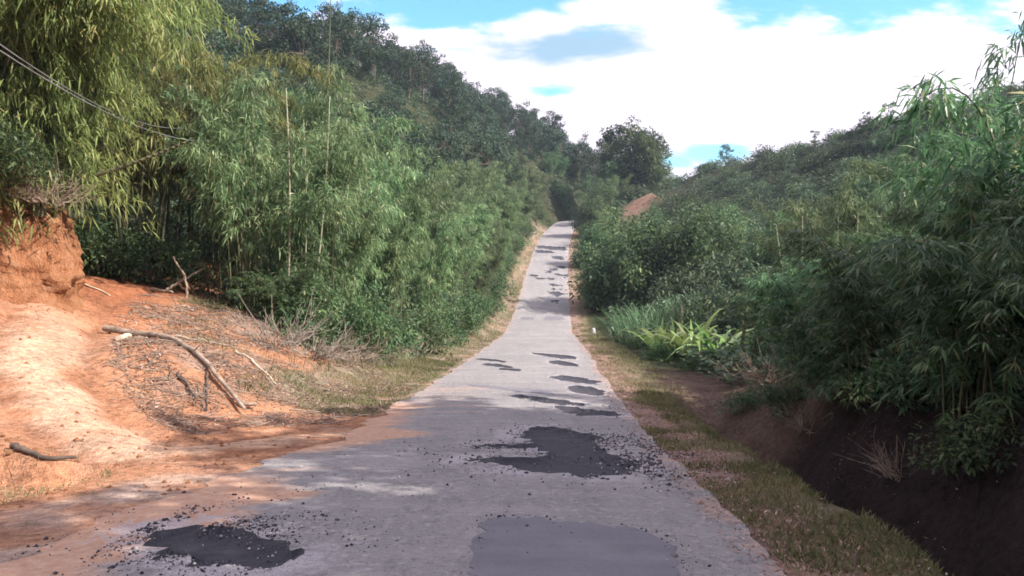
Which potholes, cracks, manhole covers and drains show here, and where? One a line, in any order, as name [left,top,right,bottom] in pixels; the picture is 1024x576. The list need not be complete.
pothole [143,525,306,568]
pothole [507,394,585,406]
pothole [467,426,644,478]
pothole [568,385,606,396]
pothole [551,375,601,385]
pothole [554,405,621,416]
